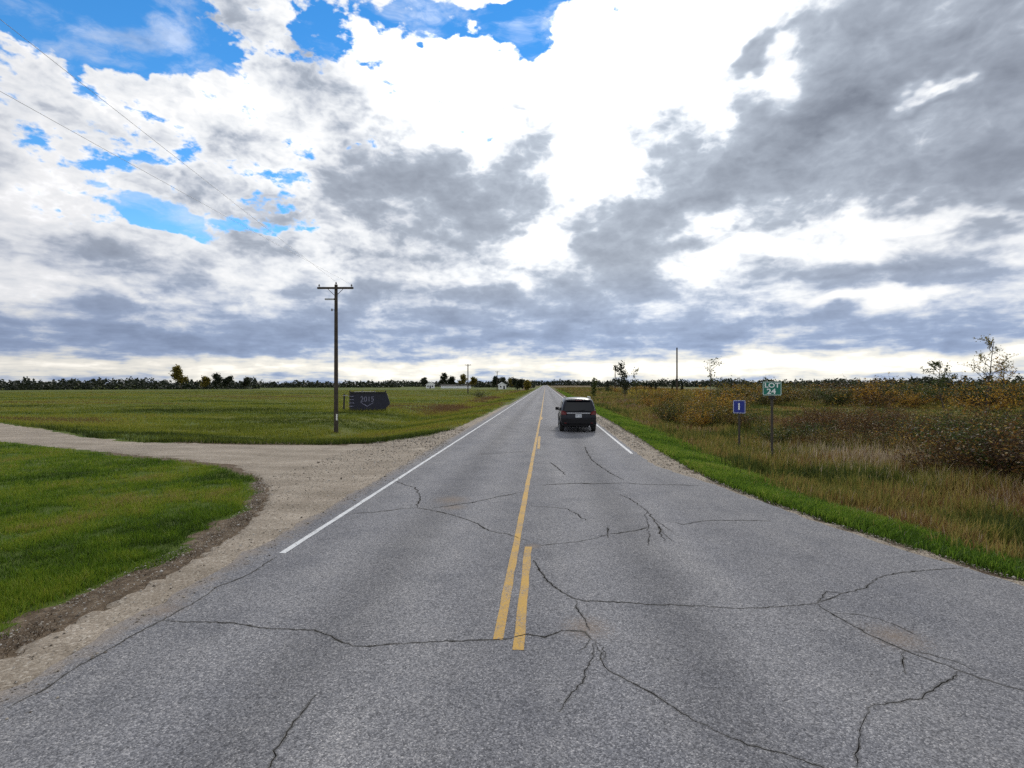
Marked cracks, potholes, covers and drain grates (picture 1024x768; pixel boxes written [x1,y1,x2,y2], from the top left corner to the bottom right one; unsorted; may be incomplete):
crack [5,446,1024,768]
